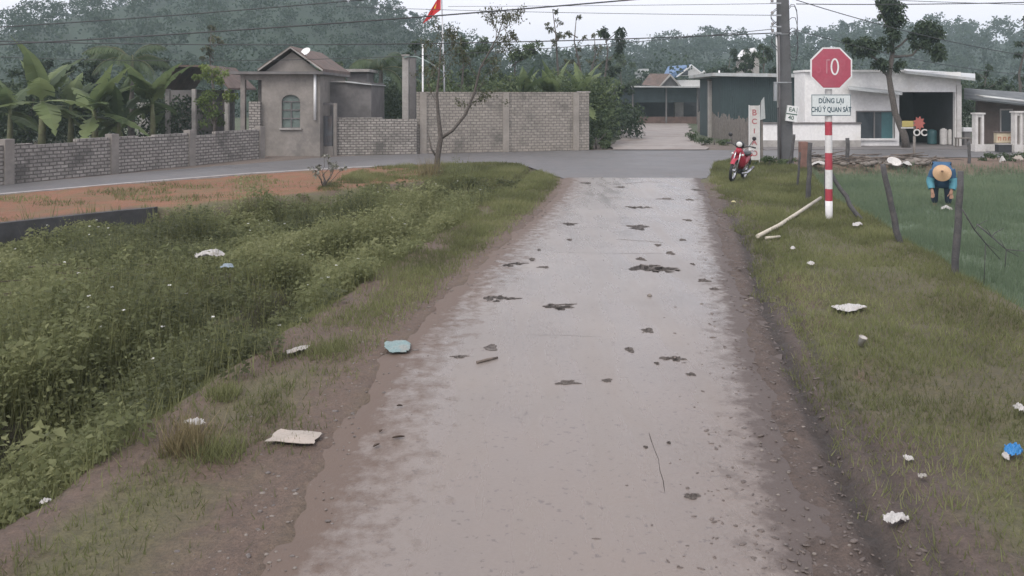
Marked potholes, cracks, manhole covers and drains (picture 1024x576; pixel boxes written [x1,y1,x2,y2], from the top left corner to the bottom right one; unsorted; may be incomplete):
pothole [628,264,680,273]
